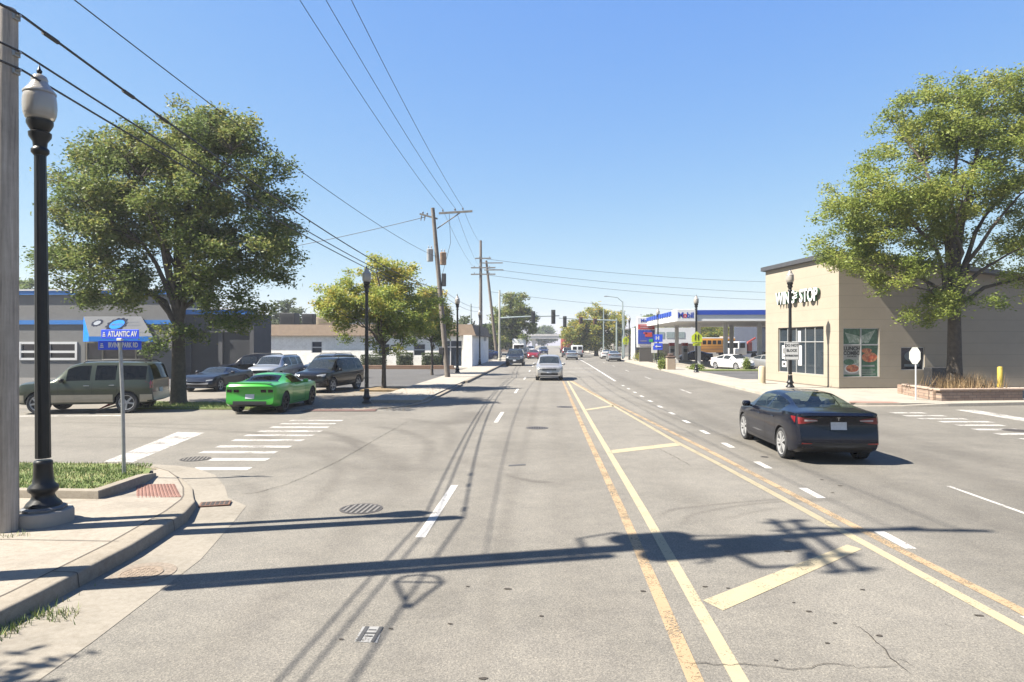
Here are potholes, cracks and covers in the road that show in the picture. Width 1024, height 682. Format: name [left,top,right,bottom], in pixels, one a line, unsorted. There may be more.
crack [681,623,910,672]
drain grate [198,500,232,508]
manhole cover [104,562,177,585]
manhole cover [339,503,383,514]
